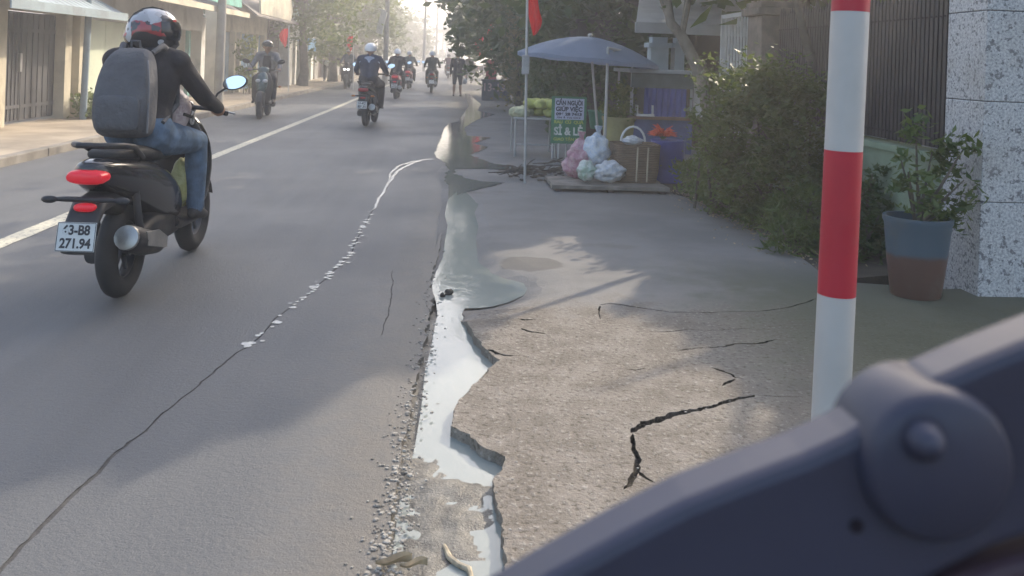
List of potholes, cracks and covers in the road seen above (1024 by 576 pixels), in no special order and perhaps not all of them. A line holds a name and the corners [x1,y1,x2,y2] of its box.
crack [598,298,817,350]
crack [625,368,755,488]
crack [0,159,432,573]
